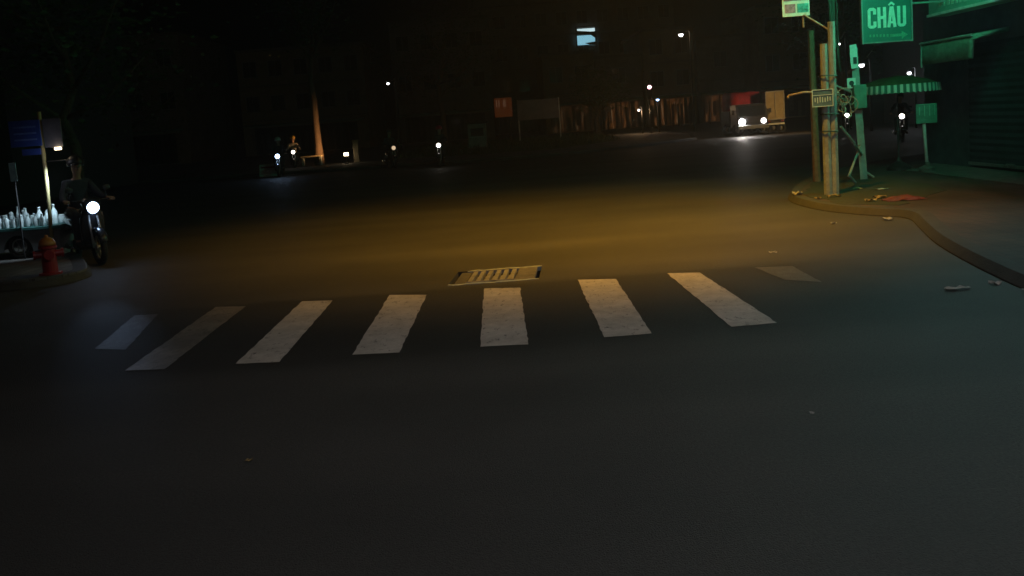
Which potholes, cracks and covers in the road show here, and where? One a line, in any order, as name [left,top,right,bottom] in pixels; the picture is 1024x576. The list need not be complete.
drain grate [448,265,542,286]
